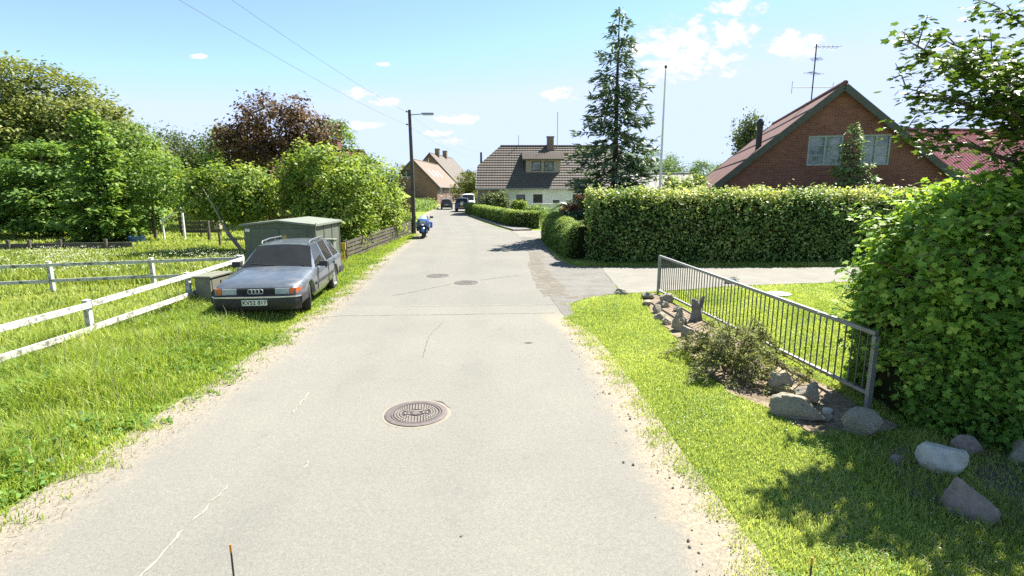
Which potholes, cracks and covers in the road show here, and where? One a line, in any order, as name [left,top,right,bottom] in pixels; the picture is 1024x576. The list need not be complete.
manhole cover [381,400,451,429]
crack [140,485,228,576]
